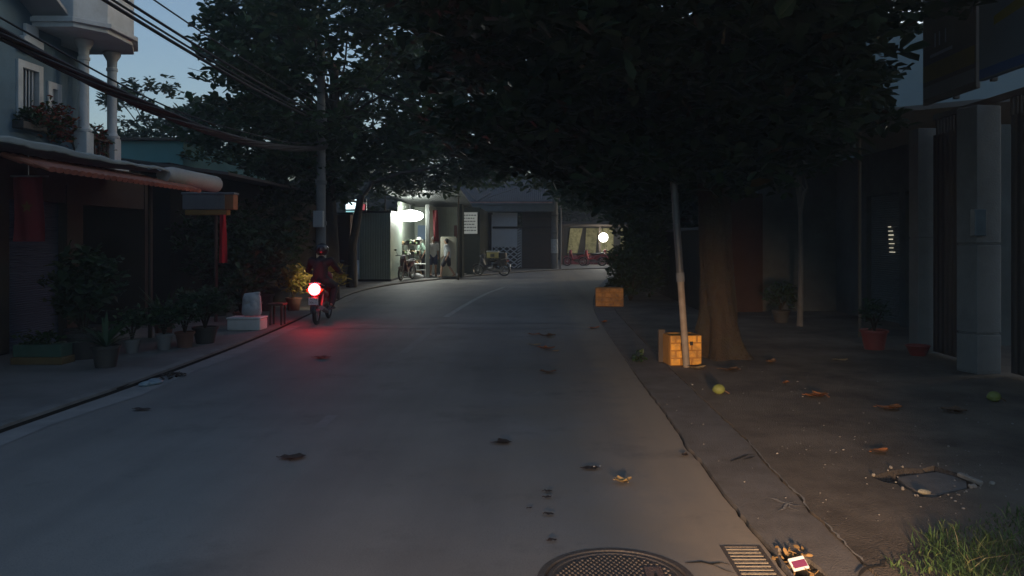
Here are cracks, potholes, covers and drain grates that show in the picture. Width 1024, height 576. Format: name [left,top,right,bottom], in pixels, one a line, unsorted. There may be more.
drain grate [720,545,782,576]
crack [769,497,806,511]
crack [686,561,734,573]
manhole cover [537,548,693,576]
